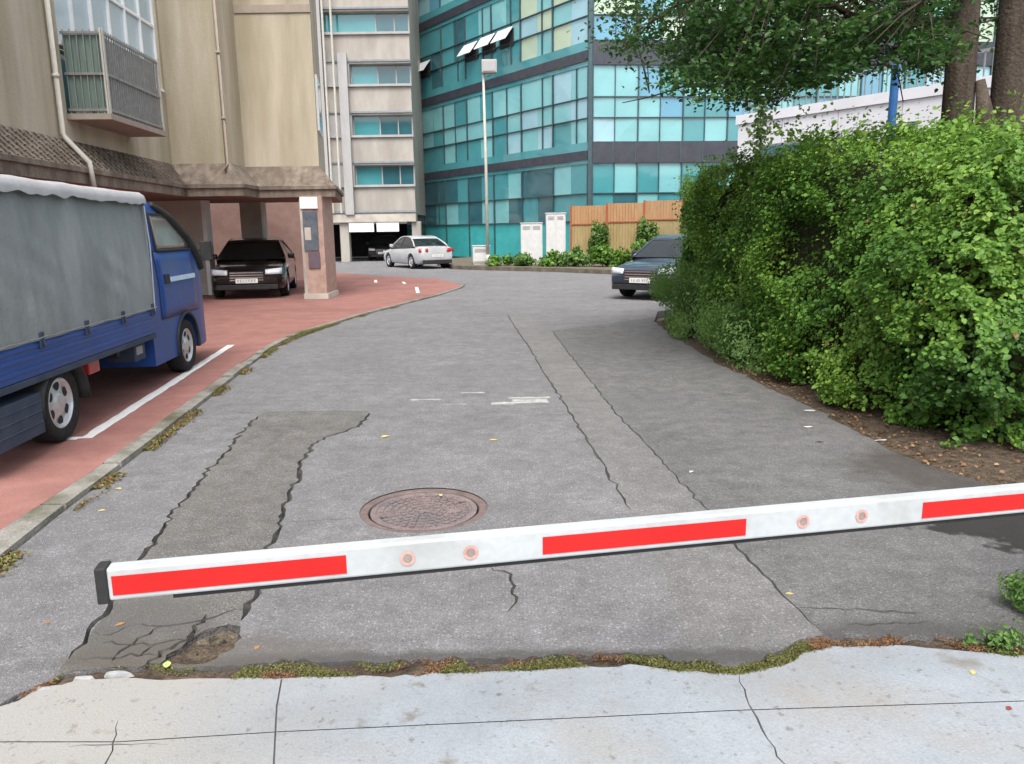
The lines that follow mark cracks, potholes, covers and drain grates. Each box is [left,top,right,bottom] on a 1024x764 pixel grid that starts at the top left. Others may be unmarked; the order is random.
crack [491,567,518,611]
crack [507,315,928,630]
manhole cover [359,489,487,533]
crack [68,411,370,668]
pothole [160,624,241,668]
